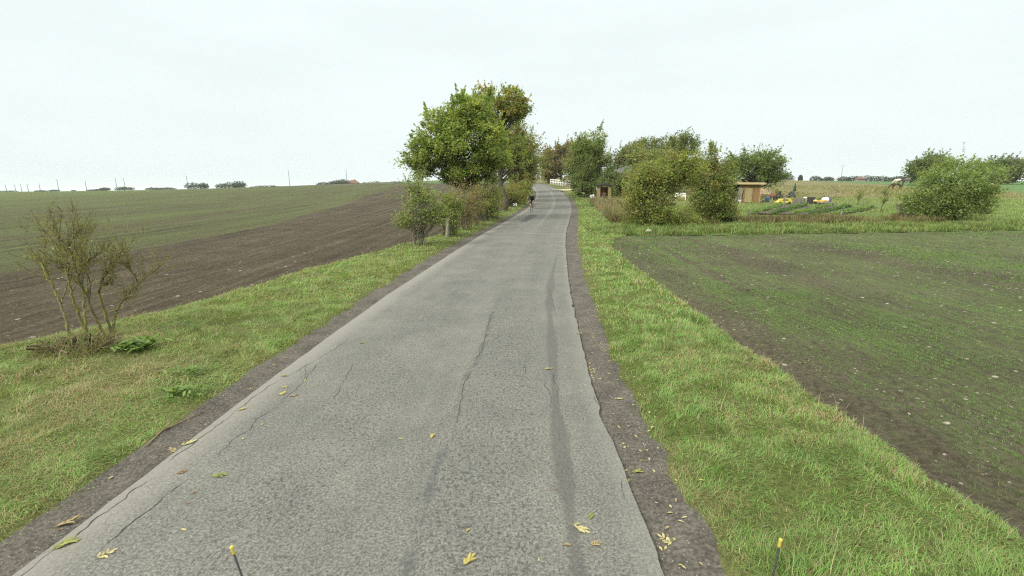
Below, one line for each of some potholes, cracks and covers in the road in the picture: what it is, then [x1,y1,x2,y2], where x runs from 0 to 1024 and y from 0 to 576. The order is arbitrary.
crack [175,344,341,456]
crack [21,480,182,576]
